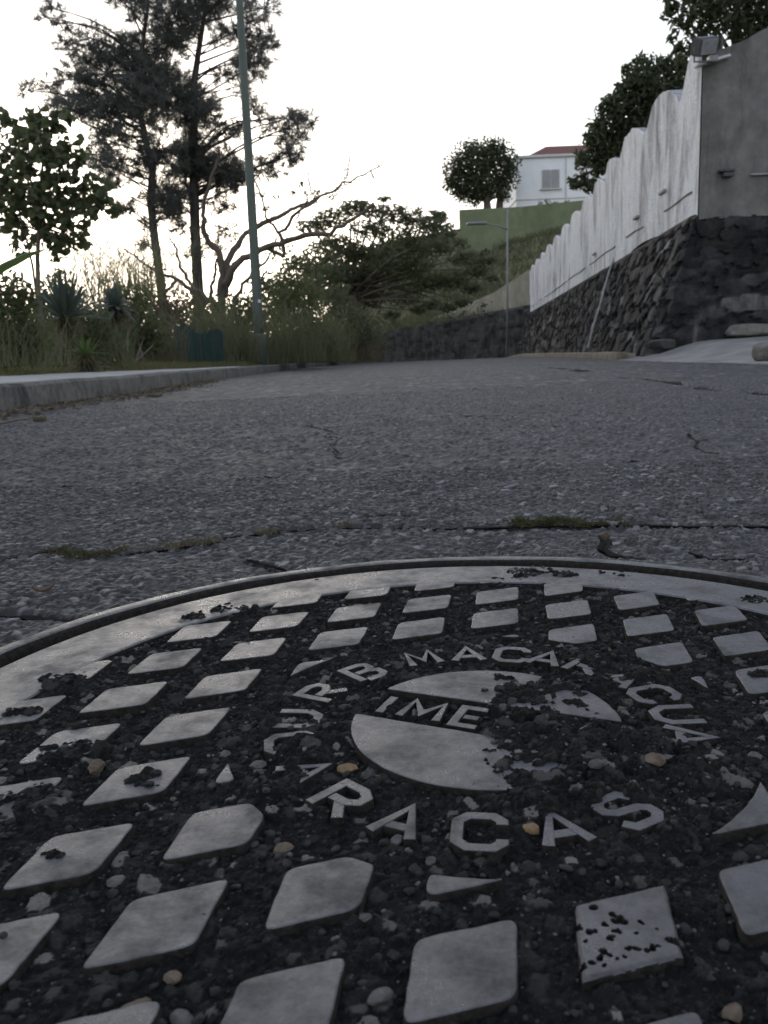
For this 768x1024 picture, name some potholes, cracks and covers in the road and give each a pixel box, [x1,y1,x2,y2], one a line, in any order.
crack [2,507,768,561]
manhole cover [0,556,768,1024]
crack [311,423,342,459]
